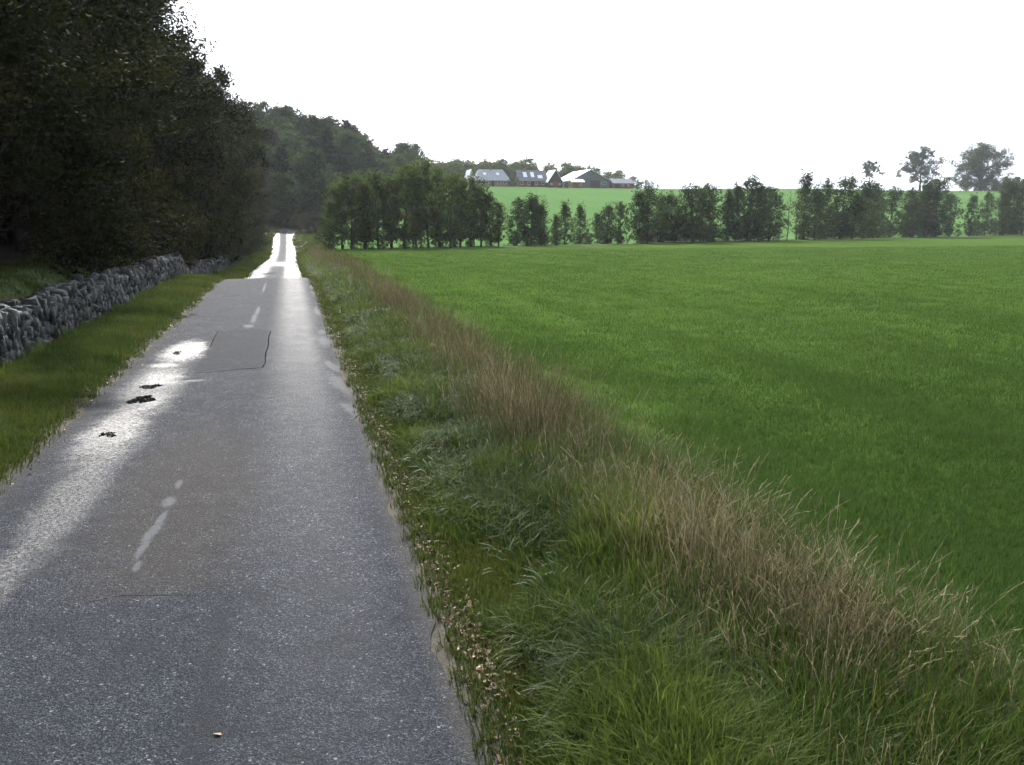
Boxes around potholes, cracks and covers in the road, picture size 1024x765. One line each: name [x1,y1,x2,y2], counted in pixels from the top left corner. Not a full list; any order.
pothole [126,395,156,404]
